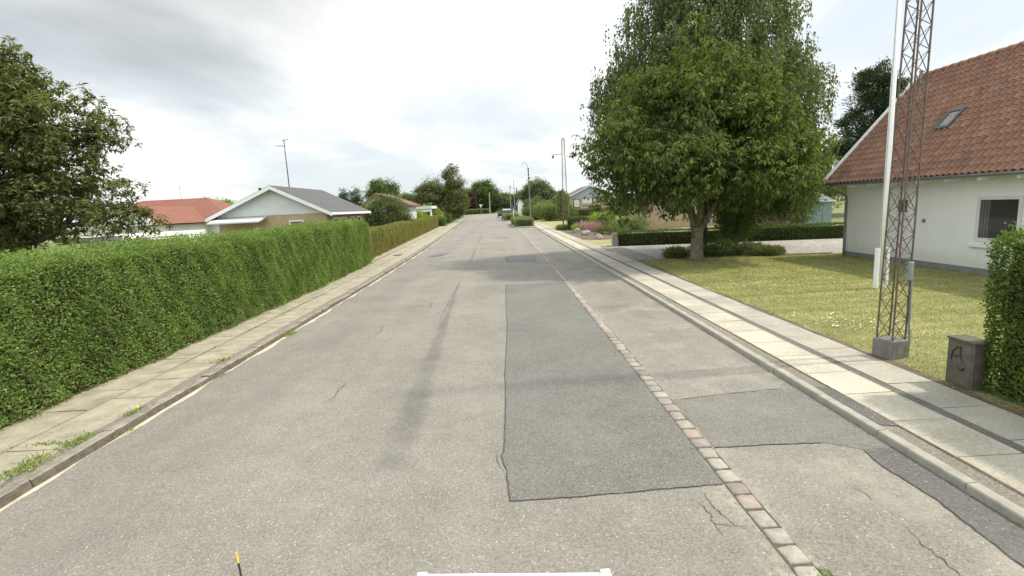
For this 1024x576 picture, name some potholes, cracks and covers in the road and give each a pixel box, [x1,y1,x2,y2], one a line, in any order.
crack [698,492,746,535]
